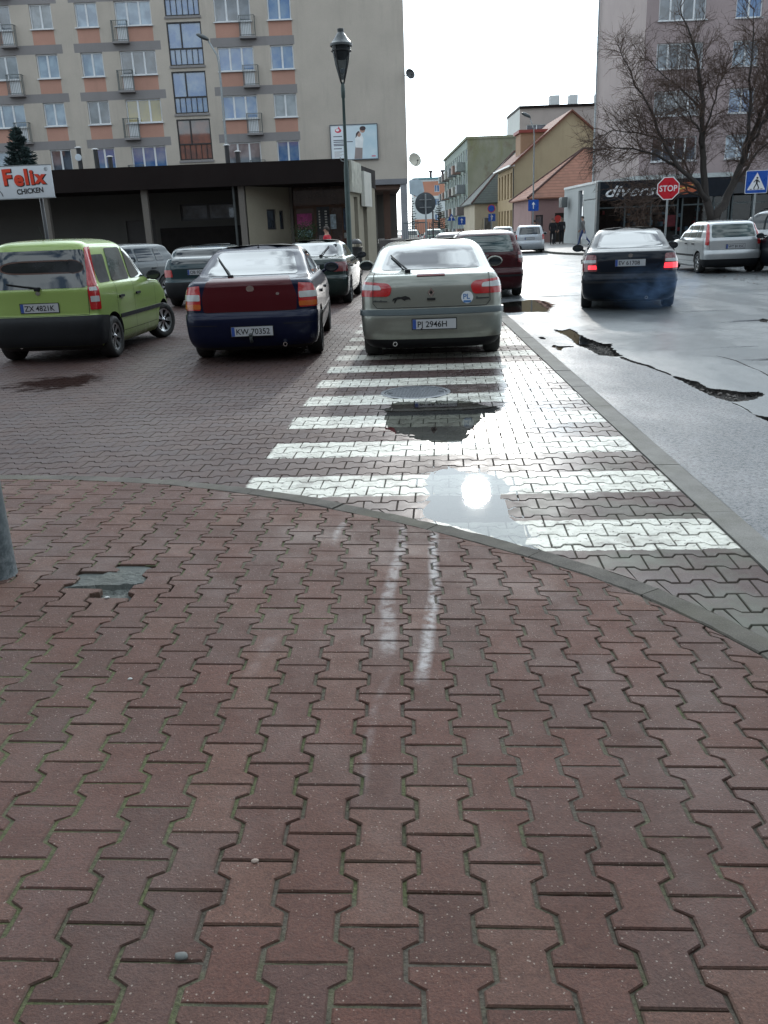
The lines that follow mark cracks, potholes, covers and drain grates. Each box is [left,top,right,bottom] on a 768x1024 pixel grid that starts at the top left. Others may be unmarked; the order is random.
manhole cover [381,386,451,399]
crack [620,357,671,375]
pothole [64,566,151,601]
